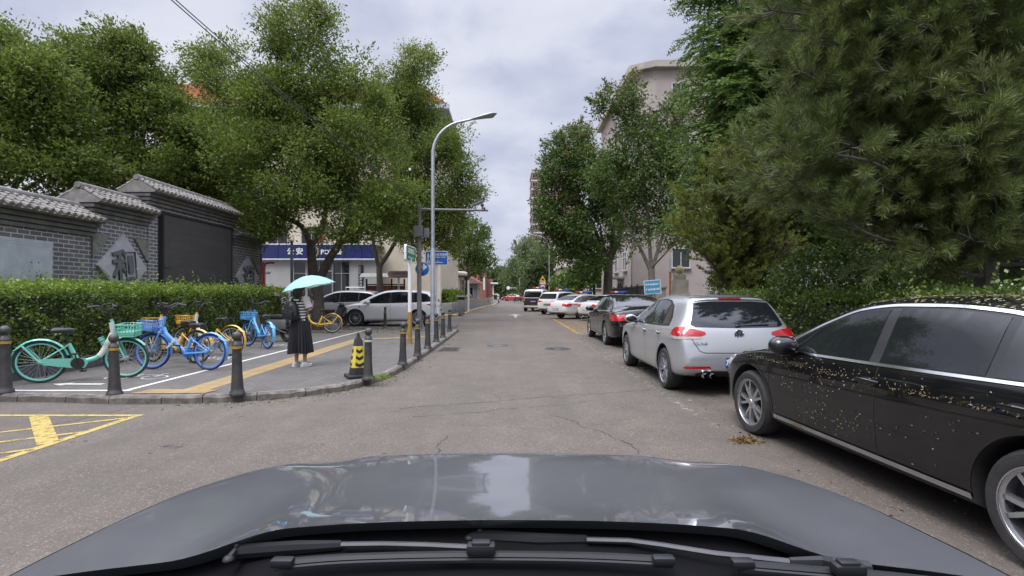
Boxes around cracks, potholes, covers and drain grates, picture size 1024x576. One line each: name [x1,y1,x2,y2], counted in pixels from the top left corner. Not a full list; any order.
crack [400,390,645,454]
